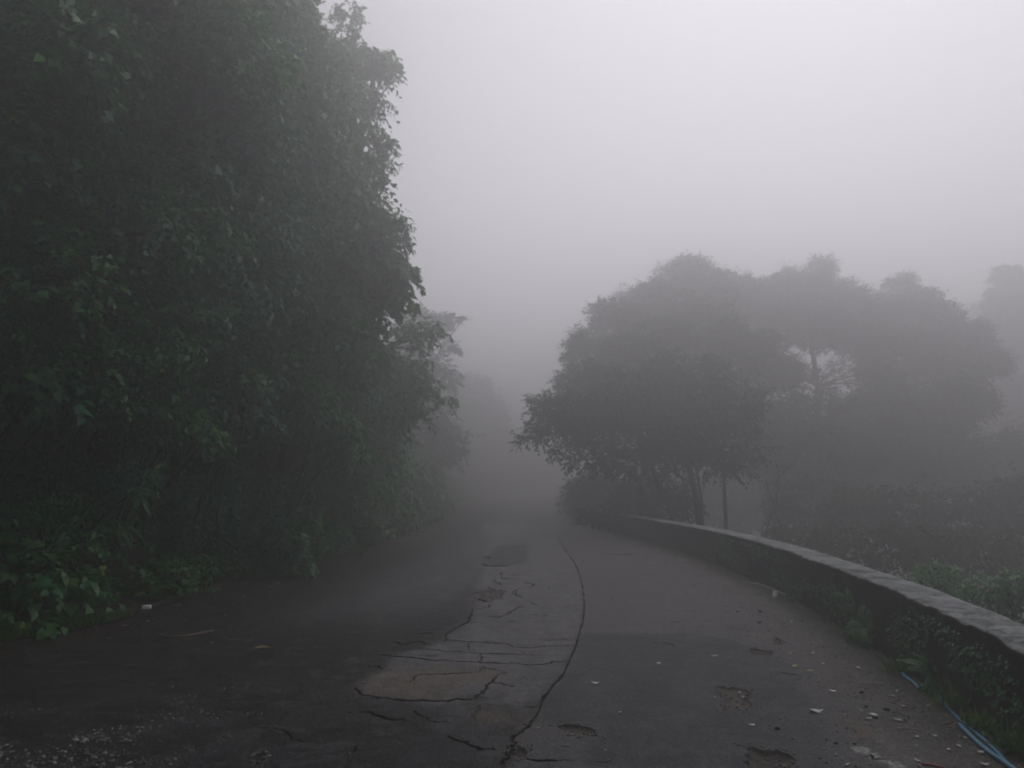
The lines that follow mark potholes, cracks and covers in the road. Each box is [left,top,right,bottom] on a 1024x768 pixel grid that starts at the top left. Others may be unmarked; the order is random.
pothole [547,722,606,740]
pothole [715,681,758,713]
crack [523,745,616,764]
pothole [743,647,776,656]
crack [345,556,577,752]
pothole [733,741,801,768]
